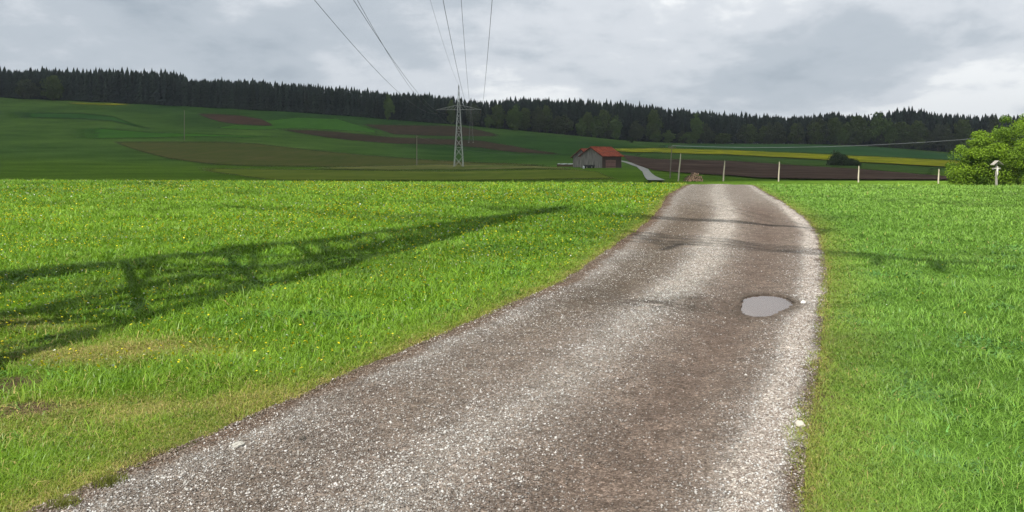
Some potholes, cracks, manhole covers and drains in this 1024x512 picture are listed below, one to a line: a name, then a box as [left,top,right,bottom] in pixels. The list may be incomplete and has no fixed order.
pothole [735,293,800,320]
